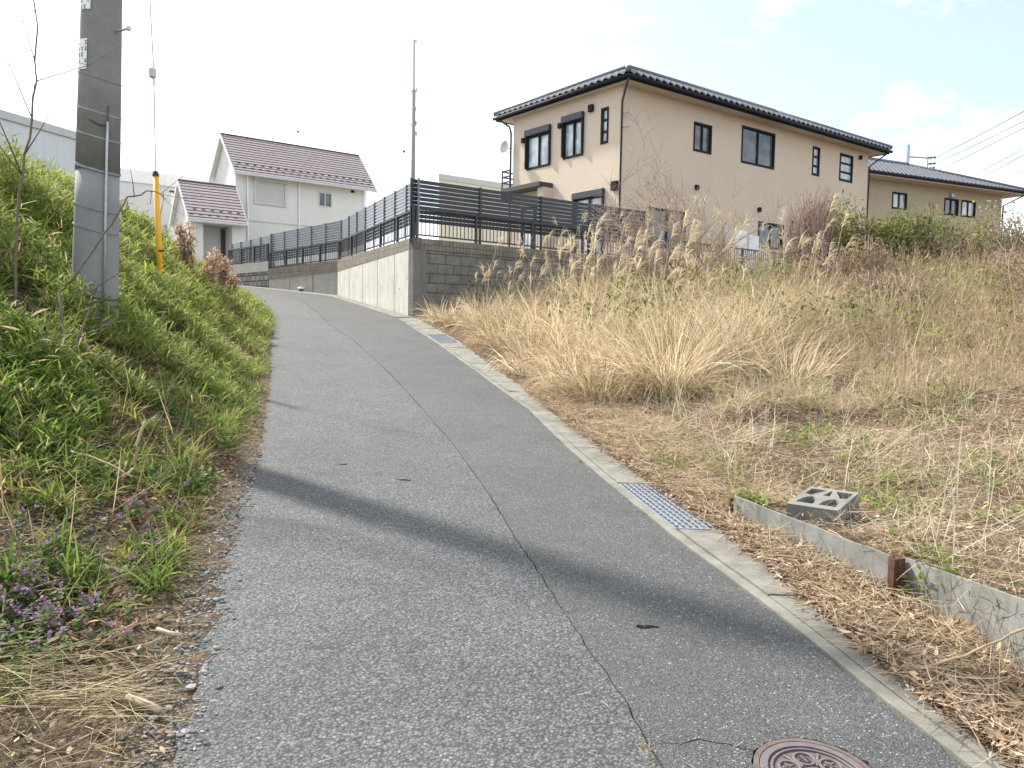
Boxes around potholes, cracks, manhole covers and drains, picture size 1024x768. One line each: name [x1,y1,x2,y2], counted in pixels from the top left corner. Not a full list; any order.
manhole cover [753,738,870,768]
drain grate [619,483,716,531]
drain grate [428,335,459,343]
